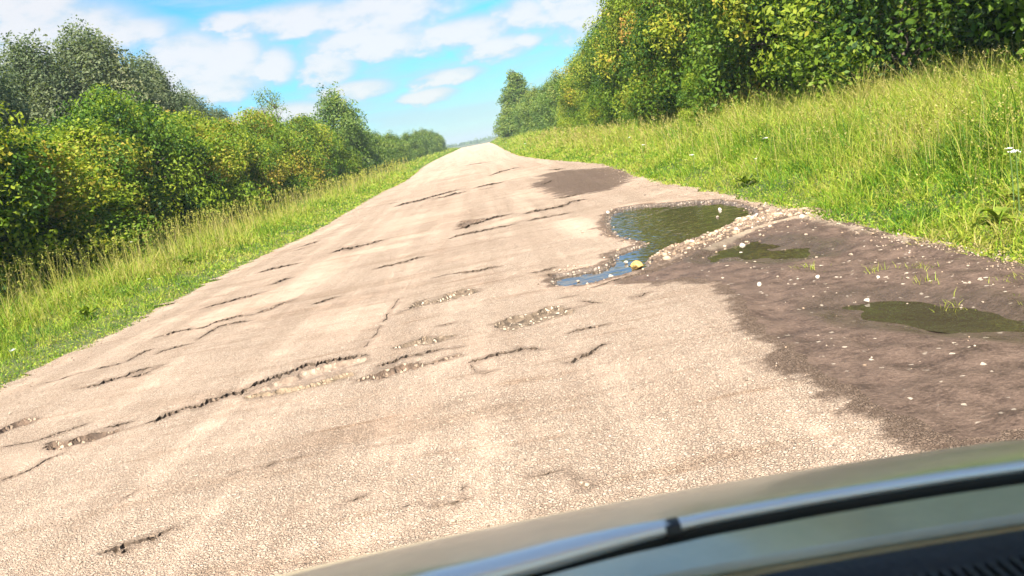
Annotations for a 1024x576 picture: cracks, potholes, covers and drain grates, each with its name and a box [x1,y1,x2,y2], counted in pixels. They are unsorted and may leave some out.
pothole [357,354,462,382]
pothole [245,358,368,395]
crack [389,163,519,207]
pothole [549,199,760,286]
pothole [408,289,479,309]
pothole [43,429,124,450]
crack [4,424,85,447]
crack [62,240,540,428]
crack [566,323,608,363]
pothole [494,306,575,331]
crack [434,487,469,507]
